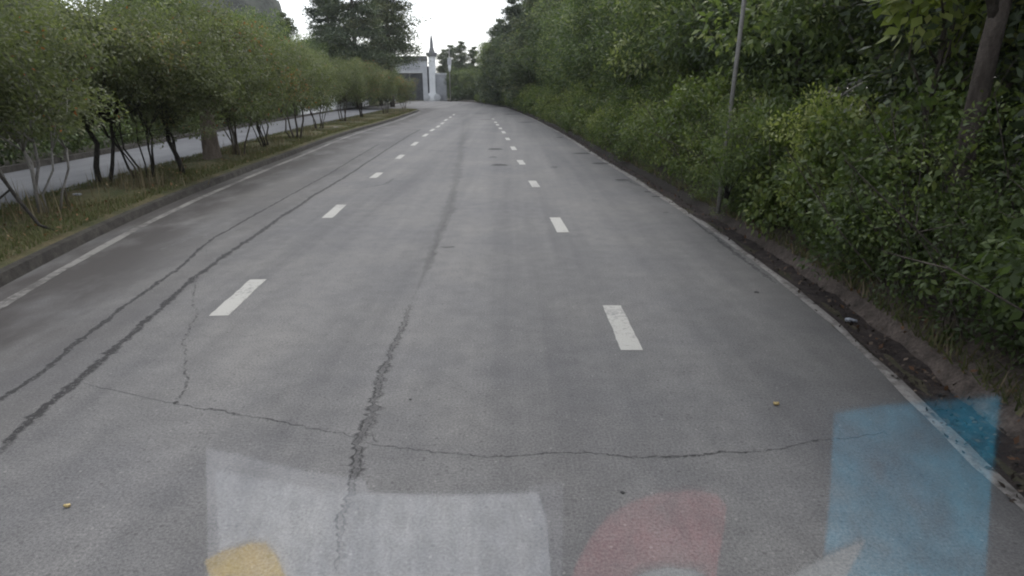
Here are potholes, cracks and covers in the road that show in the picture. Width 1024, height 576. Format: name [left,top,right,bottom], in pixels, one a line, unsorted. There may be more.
crack [81,276,885,572]
